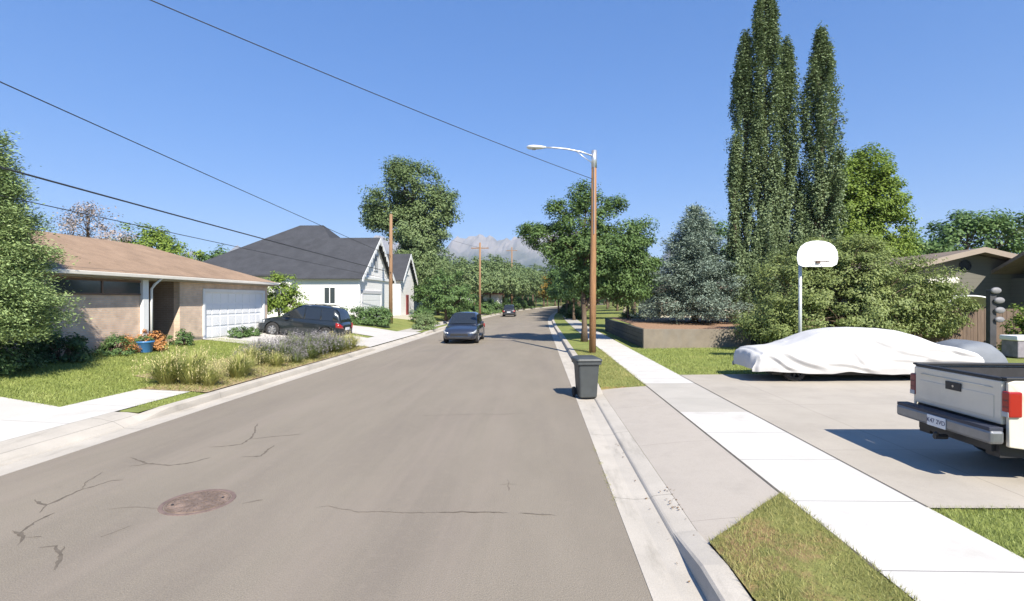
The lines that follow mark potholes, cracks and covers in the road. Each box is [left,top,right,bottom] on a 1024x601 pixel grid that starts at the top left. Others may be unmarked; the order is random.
crack [242,500,553,515]
crack [12,472,115,570]
crack [133,425,296,466]
manhole cover [157,489,236,516]
